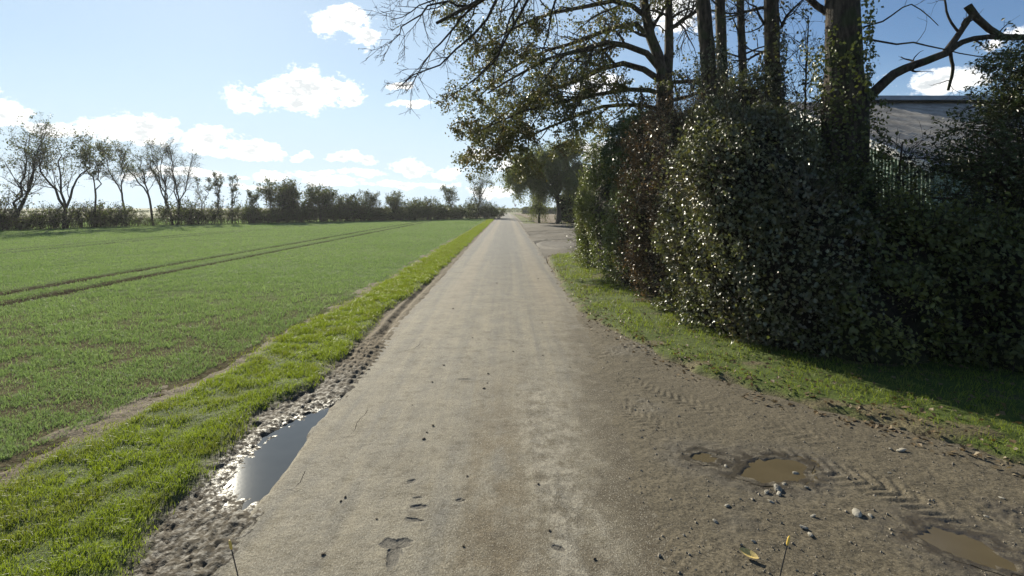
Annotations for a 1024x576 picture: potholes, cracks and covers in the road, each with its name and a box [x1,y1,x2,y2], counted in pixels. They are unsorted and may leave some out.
crack [342,405,373,437]
pothole [683,448,725,466]
pothole [902,519,1024,576]
crack [286,466,313,492]
pothole [729,453,820,488]
